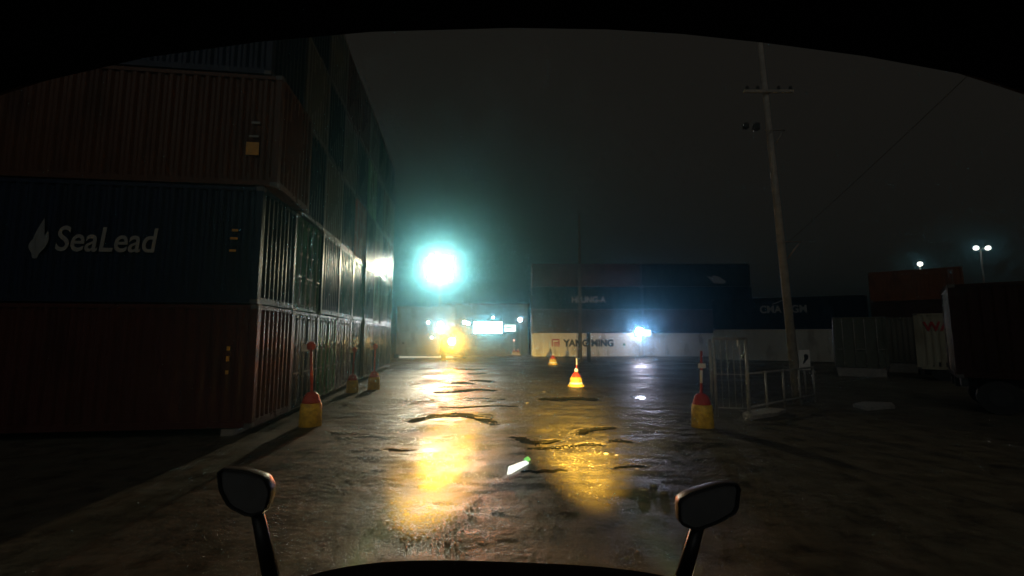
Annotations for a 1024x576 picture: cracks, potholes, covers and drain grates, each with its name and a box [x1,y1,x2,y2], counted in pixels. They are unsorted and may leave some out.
pothole [528,442,603,451]
pothole [403,412,503,426]
pothole [508,436,563,446]
